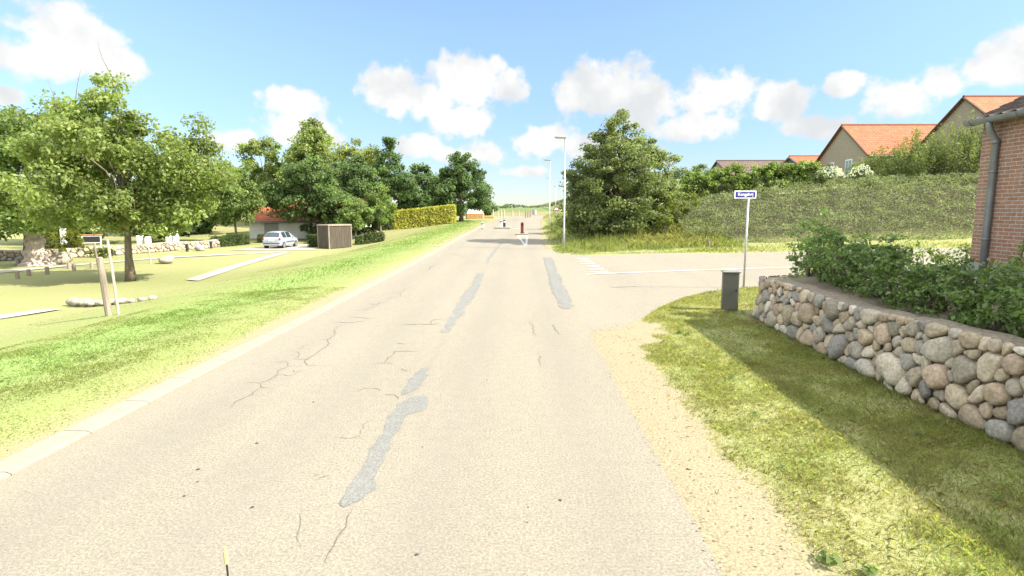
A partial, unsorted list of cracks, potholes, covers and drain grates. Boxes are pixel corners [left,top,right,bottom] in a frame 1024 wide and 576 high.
crack [232,287,411,406]
